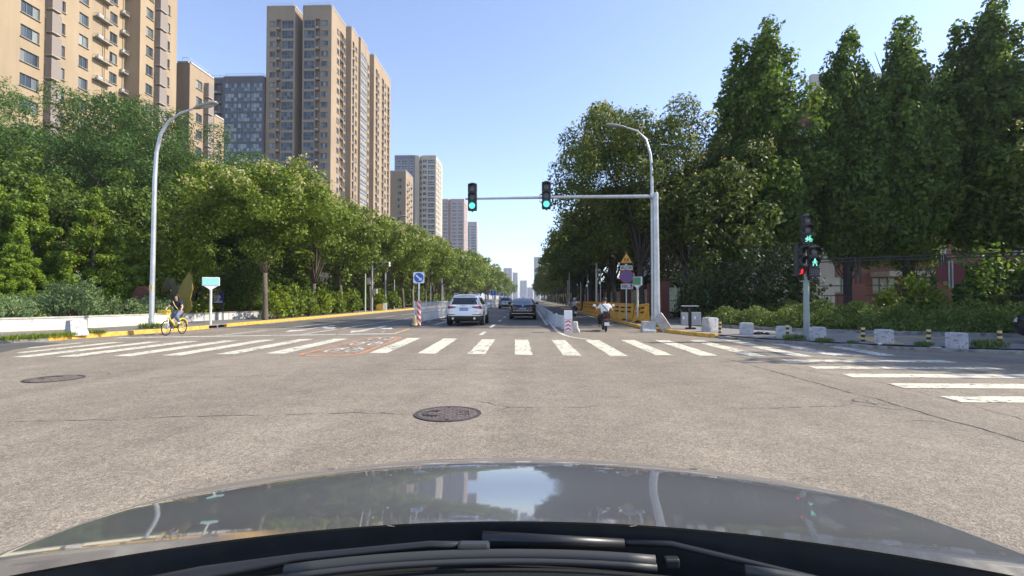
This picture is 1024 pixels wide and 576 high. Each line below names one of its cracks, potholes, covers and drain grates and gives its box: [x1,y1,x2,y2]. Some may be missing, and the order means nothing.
crack [12,412,391,422]
crack [780,398,937,422]
manhole cover [414,406,481,422]
manhole cover [21,375,86,383]
